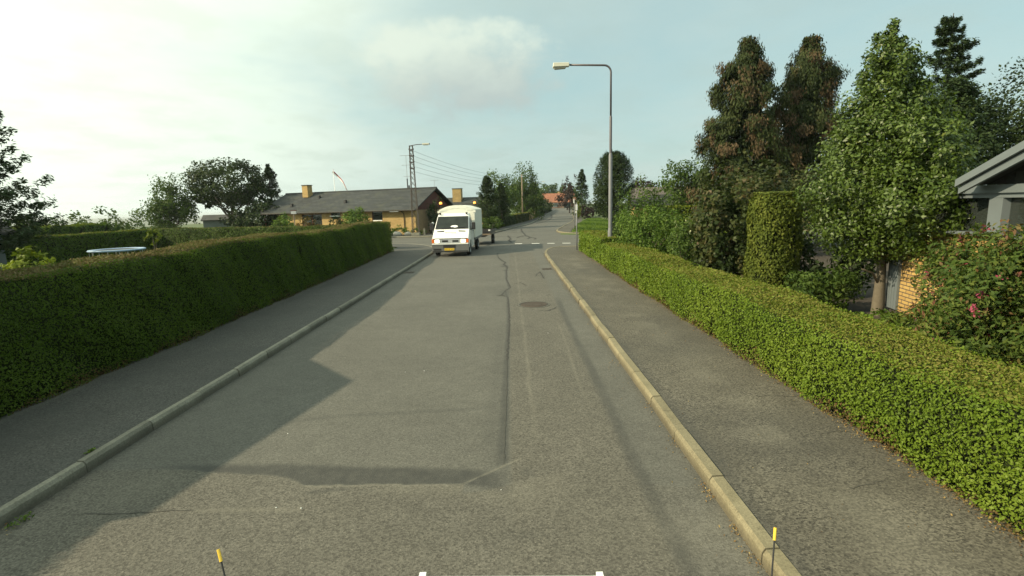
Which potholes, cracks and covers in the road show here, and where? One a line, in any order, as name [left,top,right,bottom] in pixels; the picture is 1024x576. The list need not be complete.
crack [496,214,556,461]
